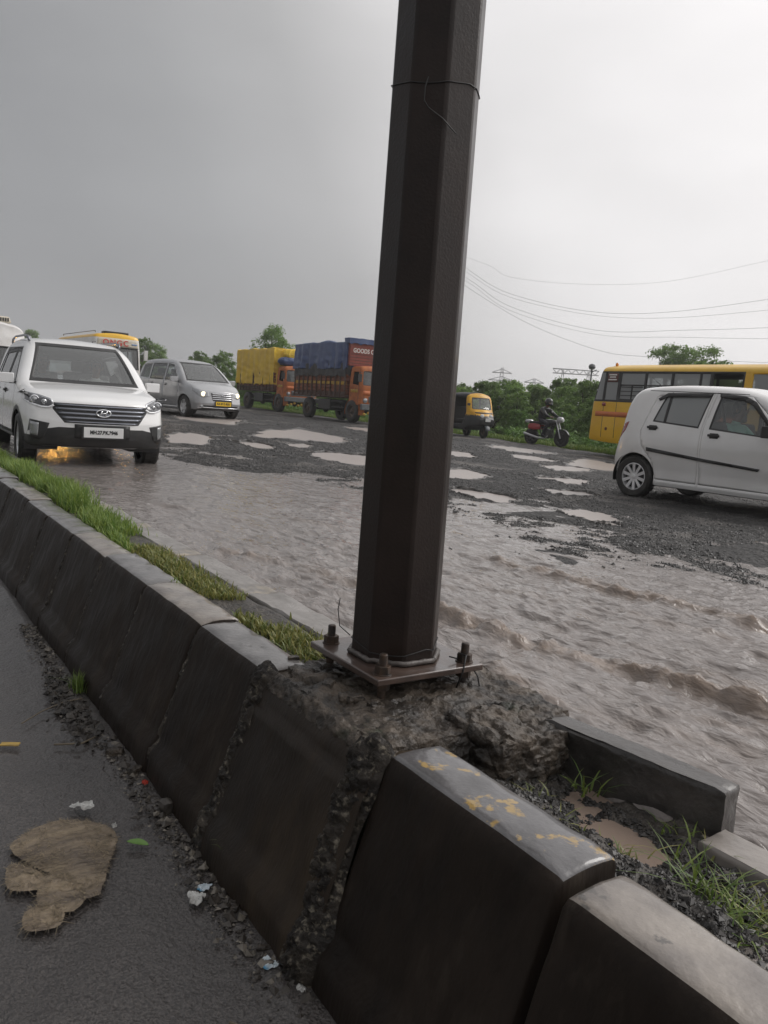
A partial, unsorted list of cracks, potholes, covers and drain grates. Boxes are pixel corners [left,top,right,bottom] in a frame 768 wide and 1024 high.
pothole [449,467,493,480]
pothole [163,432,220,446]
pothole [449,486,523,504]
pothole [563,459,615,472]
pothole [169,415,248,425]
pothole [532,475,589,486]
pothole [537,487,599,497]
pothole [247,427,352,444]
pothole [539,464,597,472]
pothole [510,454,560,462]
pothole [229,439,276,449]
pothole [555,508,622,523]
